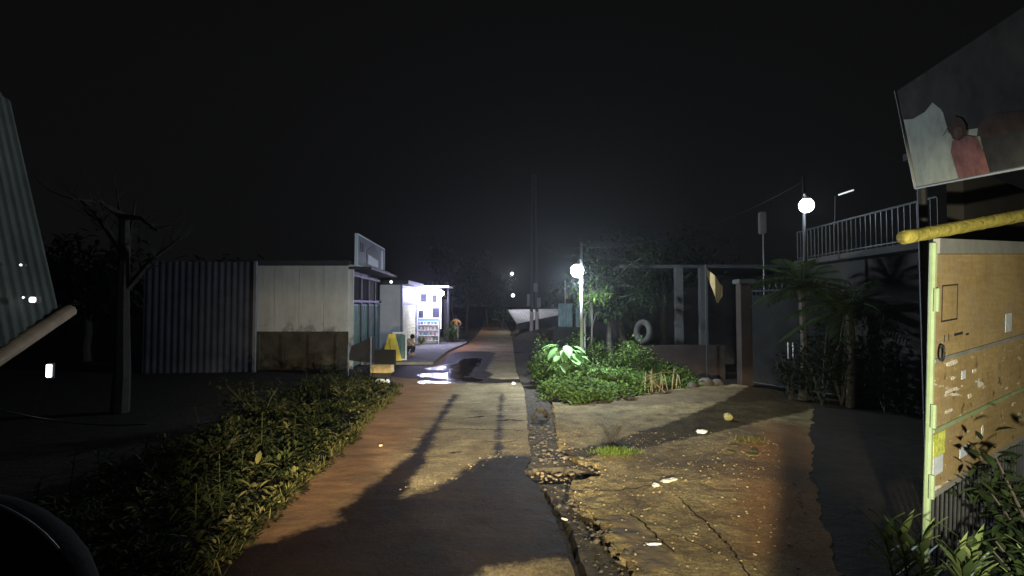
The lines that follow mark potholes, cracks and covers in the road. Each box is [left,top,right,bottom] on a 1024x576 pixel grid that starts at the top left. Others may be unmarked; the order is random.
pothole [526,467,592,485]
crack [540,482,750,576]
